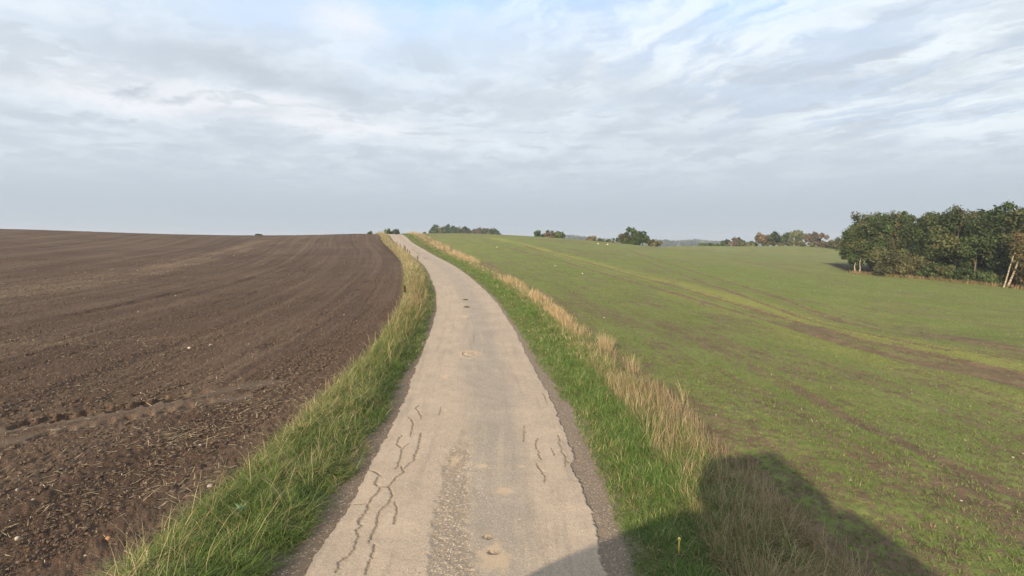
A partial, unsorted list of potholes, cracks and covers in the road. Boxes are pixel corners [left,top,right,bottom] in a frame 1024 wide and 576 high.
crack [334,405,442,574]
crack [523,424,570,484]
